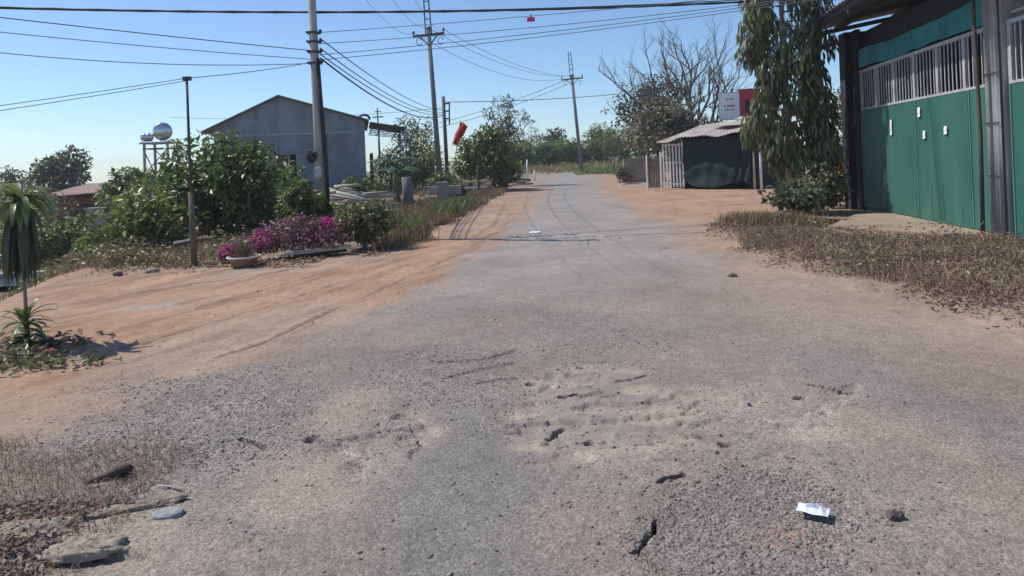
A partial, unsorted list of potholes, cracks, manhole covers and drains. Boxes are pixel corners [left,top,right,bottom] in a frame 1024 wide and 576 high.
crack [633,519,666,576]
crack [807,384,848,395]
pothole [333,407,440,480]
pothole [505,367,727,461]
crack [657,473,689,484]
